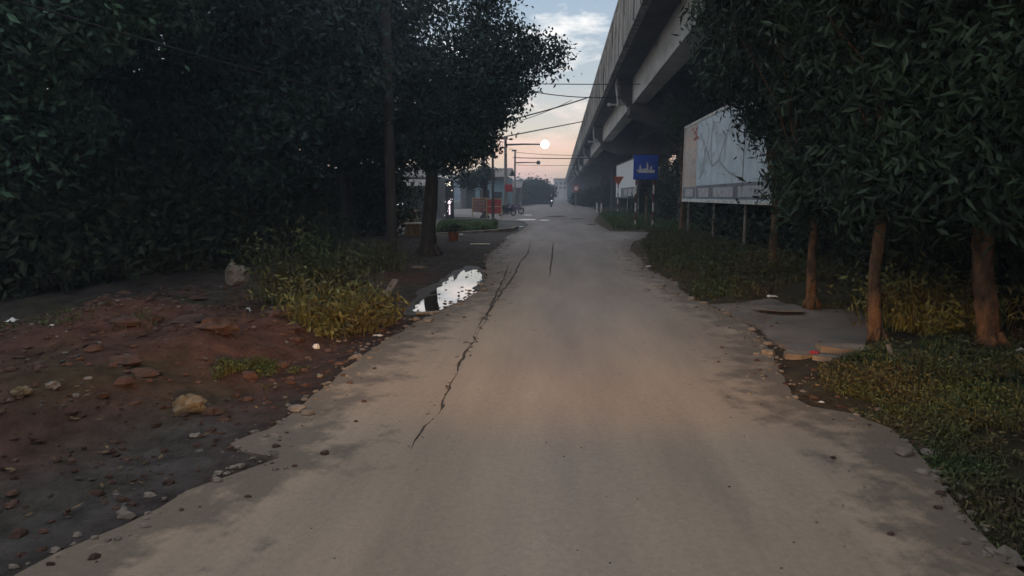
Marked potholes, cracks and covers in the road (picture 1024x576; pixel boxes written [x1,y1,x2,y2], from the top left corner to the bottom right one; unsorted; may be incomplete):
crack [353,242,531,560]
pothole [404,266,486,315]
